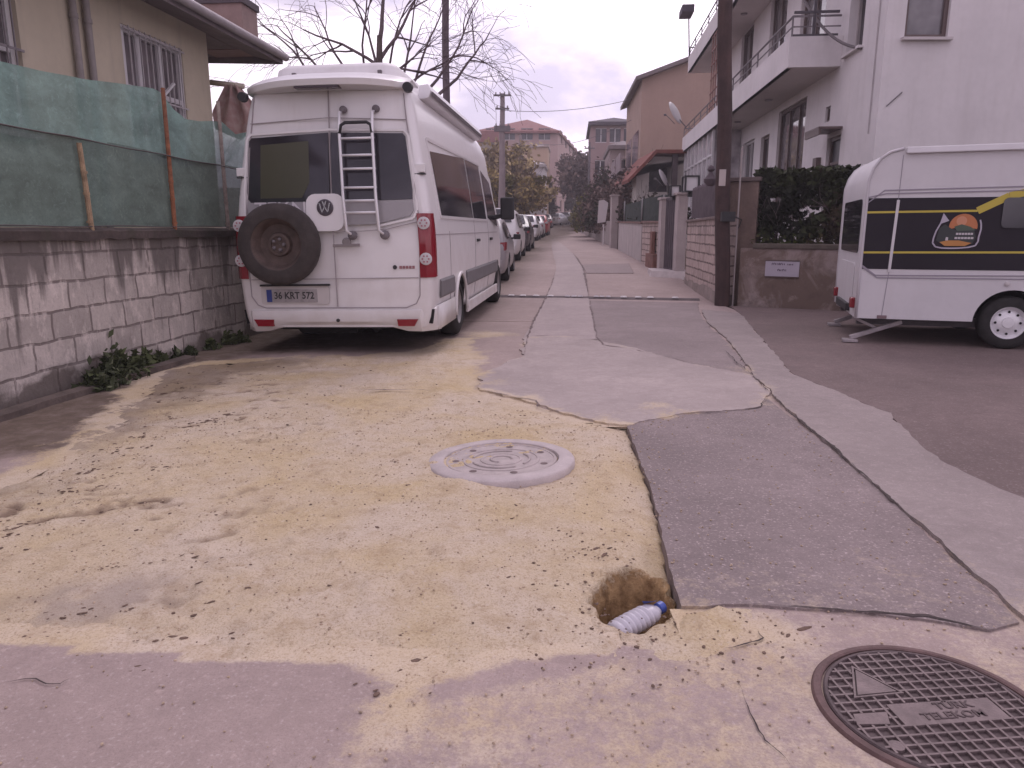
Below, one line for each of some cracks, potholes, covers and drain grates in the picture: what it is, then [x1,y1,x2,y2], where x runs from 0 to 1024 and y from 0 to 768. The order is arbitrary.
manhole cover [429,439,575,489]
manhole cover [811,645,1024,768]
crack [737,679,788,761]
pothole [579,562,677,642]
